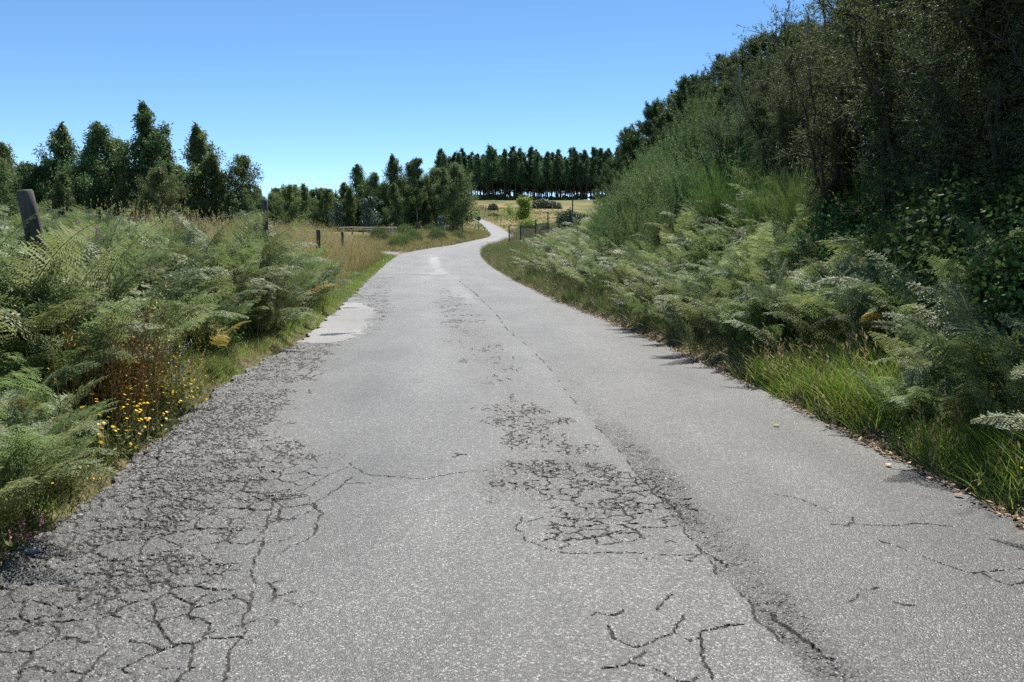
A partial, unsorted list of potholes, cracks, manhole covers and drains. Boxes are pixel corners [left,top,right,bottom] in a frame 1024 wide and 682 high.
crack [775,494,1024,586]
crack [590,594,745,682]
crack [452,394,700,562]
crack [0,344,467,682]
crack [433,288,519,384]
